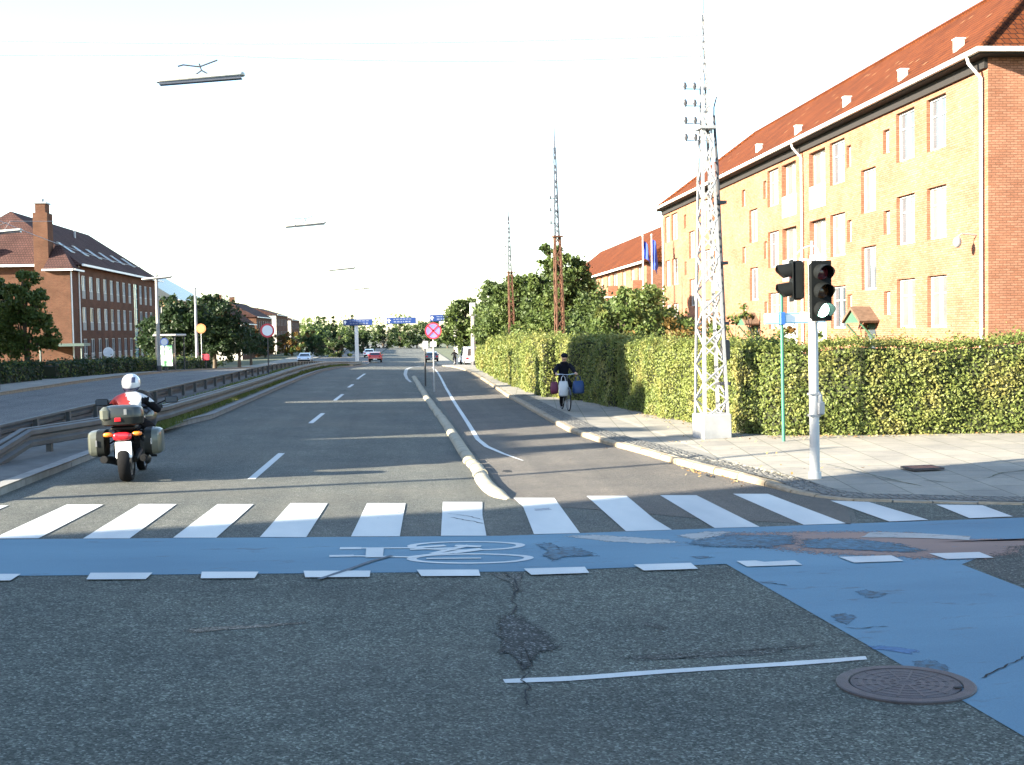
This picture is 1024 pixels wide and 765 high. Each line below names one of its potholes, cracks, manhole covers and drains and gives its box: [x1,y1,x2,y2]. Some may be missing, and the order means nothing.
crack [504,572,519,615]
crack [982,656,1024,678]
manhole cover [836,665,977,705]
crack [520,663,531,706]
